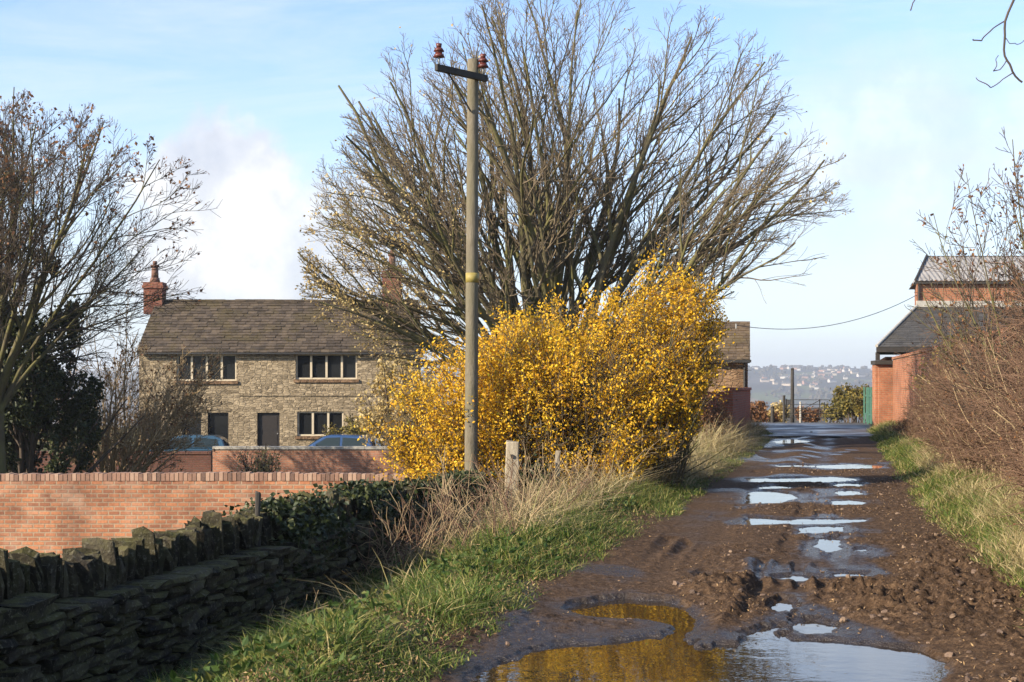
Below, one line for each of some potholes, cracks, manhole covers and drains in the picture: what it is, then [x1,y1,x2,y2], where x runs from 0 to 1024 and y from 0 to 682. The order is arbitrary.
pothole [742,514,871,525]
pothole [742,489,802,504]
pothole [793,525,849,534]
pothole [809,534,848,554]
pothole [460,592,963,682]
